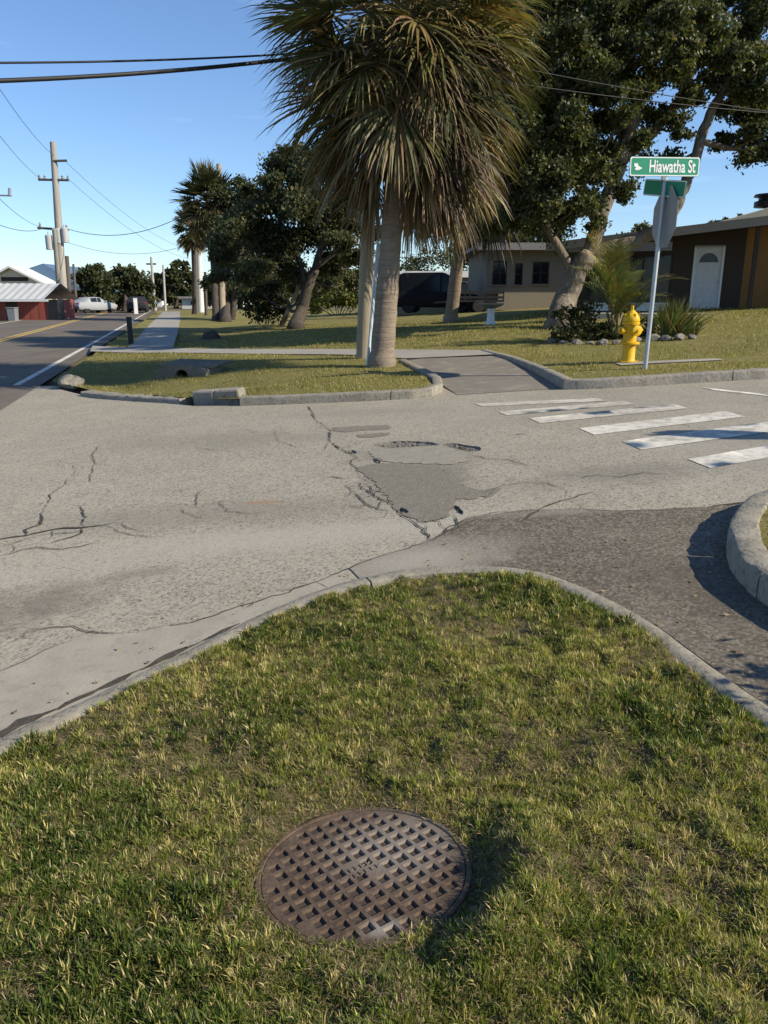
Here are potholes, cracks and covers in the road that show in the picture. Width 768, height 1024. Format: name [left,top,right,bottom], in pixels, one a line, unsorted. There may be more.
crack [0,447,148,556]
crack [307,406,743,542]
pothole [444,443,481,451]
drain grate [155,359,232,380]
manhole cover [255,807,472,951]
